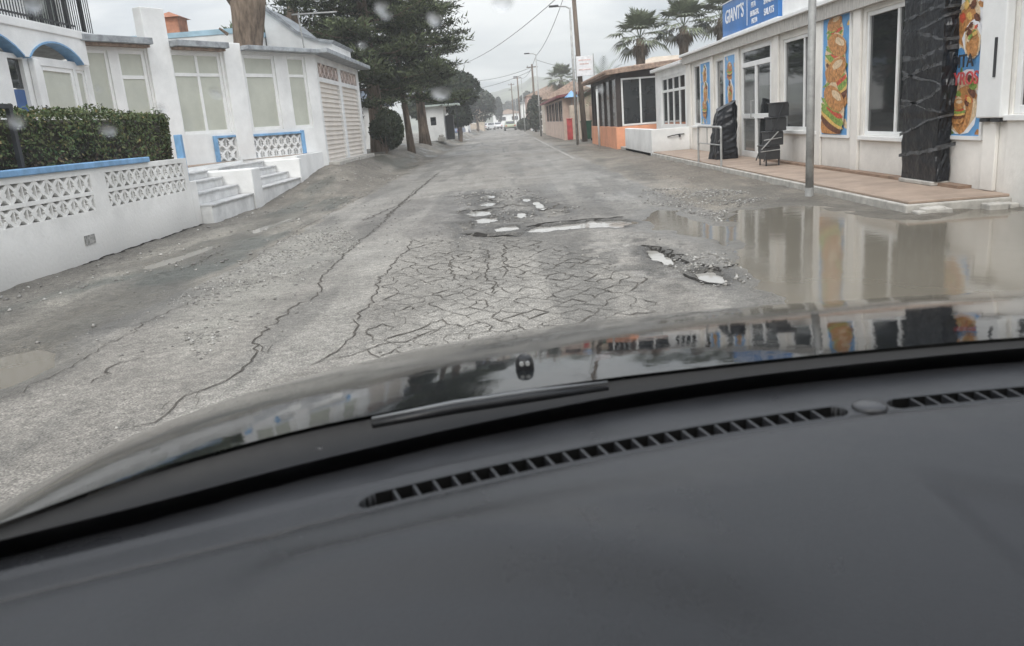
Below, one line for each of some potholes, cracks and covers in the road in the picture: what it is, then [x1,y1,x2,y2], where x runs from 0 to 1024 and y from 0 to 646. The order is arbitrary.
crack [133,187,418,427]
pothole [679,265,742,288]
pothole [458,208,499,217]
pothole [509,210,533,219]
pothole [443,221,483,232]
pothole [484,223,526,232]
pothole [518,217,649,233]
crack [1,291,209,399]
pothole [633,245,690,270]
crack [311,189,657,365]
pothole [466,215,506,224]
